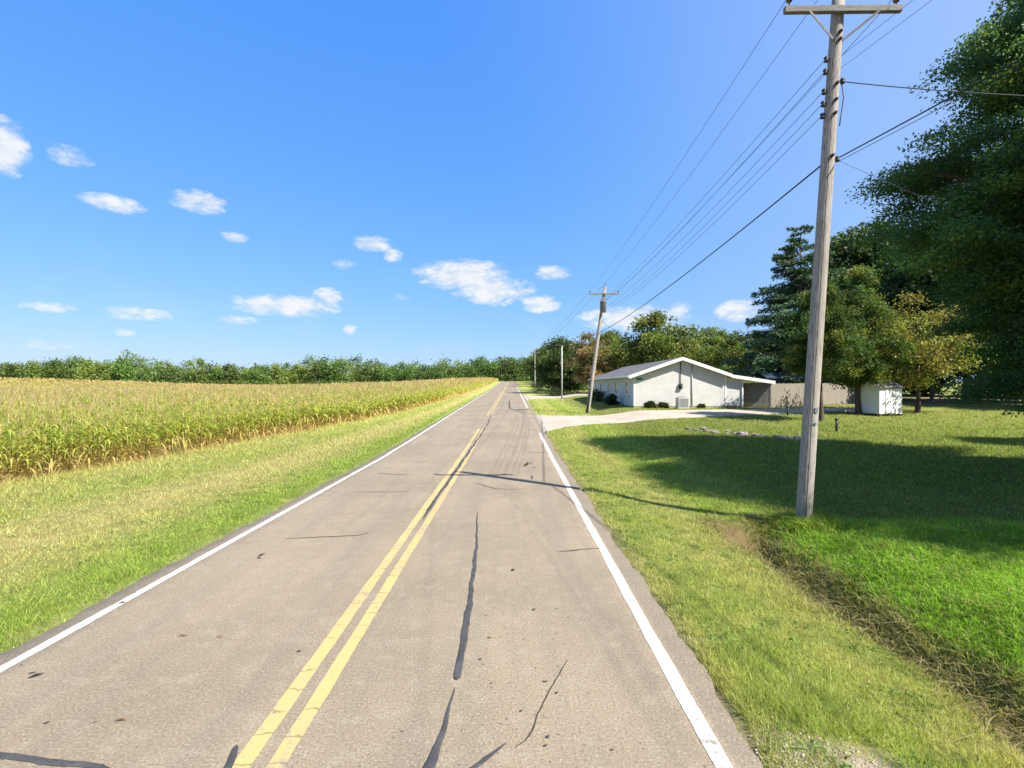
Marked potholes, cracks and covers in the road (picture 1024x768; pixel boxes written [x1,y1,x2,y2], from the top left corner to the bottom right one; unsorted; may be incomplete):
crack [515,660,568,747]
